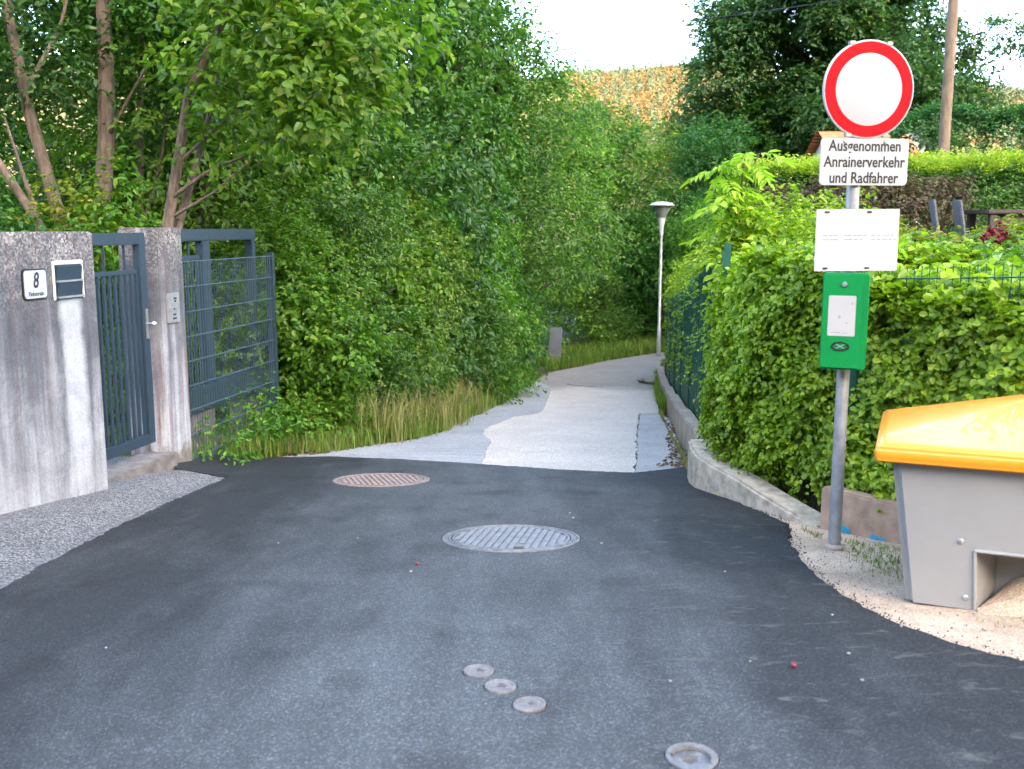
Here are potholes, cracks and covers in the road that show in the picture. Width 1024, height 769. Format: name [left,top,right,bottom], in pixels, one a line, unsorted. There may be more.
manhole cover [333,473,430,487]
manhole cover [442,524,580,553]
